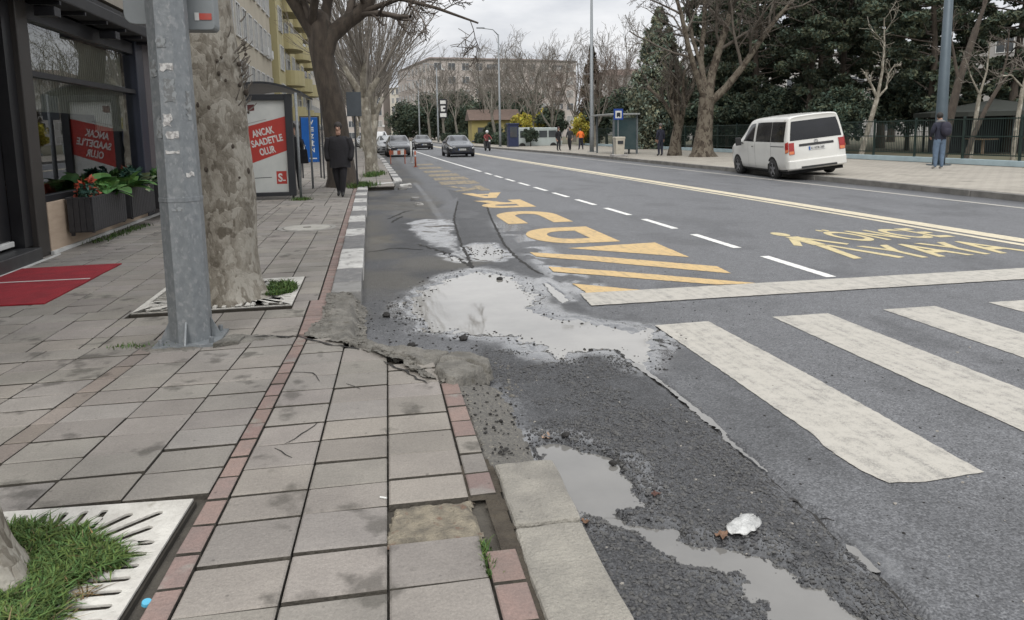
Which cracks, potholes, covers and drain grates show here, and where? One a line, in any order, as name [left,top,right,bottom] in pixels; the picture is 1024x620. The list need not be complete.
crack [371,201,544,275]
manhole cover [277,224,337,233]
pothole [594,510,893,620]
pothole [523,433,659,519]
pothole [394,268,678,374]
